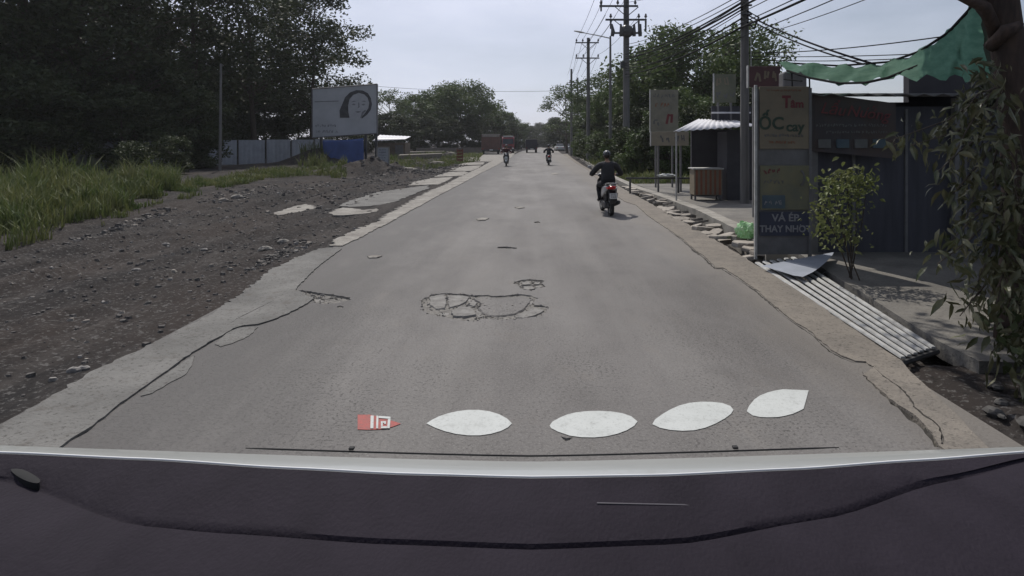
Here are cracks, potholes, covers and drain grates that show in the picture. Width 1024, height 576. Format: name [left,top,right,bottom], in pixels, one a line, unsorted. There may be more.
pothole [514,279,546,291]
pothole [298,290,351,304]
pothole [420,293,548,322]
crack [863,367,944,447]
